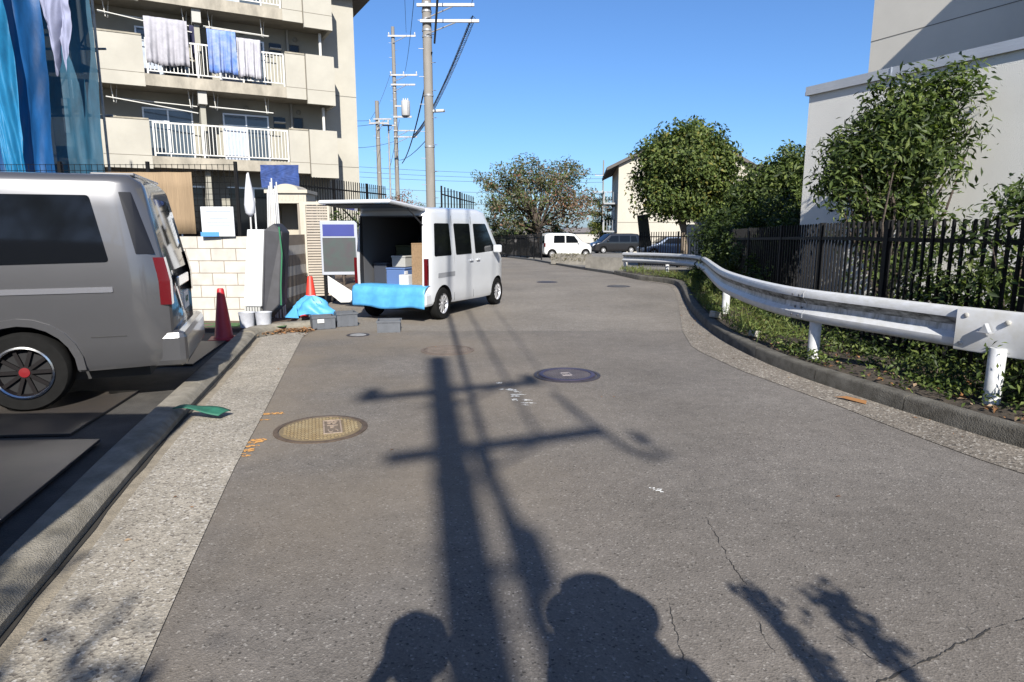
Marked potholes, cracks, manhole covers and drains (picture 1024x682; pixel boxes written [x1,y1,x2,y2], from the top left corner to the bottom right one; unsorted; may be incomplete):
manhole cover [273,415,368,444]
manhole cover [421,345,474,356]
crack [833,613,1024,682]
manhole cover [534,367,601,383]
